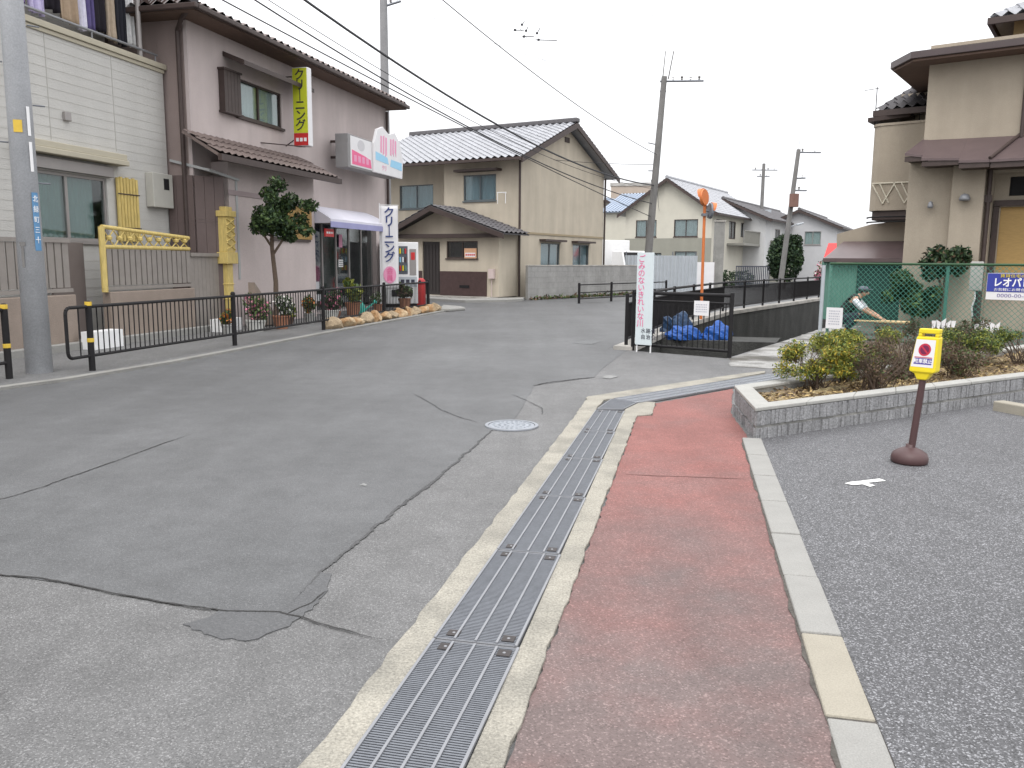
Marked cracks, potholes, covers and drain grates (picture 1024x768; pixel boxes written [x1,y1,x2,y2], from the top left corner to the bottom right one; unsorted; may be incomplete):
drain grate [536,457,603,498]
crack [0,574,398,641]
drain grate [562,430,615,460]
drain grate [340,638,520,768]
drain grate [581,410,625,432]
drain grate [597,399,639,410]
drain grate [434,549,561,648]
crack [0,435,187,499]
drain grate [497,494,586,555]
manhole cover [485,420,539,431]
